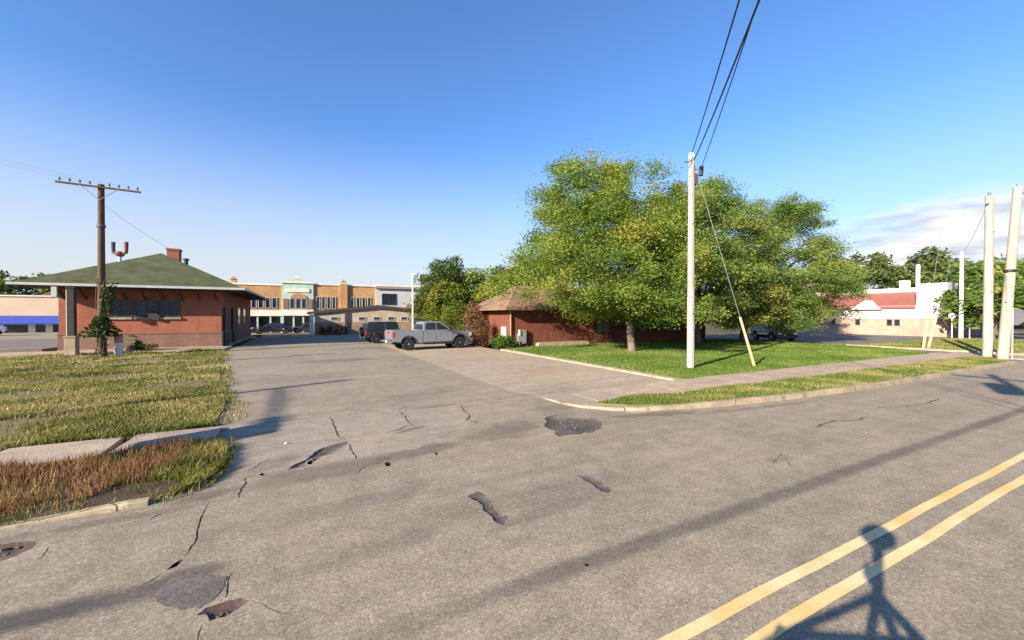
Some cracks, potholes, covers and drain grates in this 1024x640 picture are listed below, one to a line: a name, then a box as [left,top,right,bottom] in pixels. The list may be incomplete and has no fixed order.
pothole [197,598,249,621]
crack [325,417,373,474]
crack [238,444,275,498]
pothole [0,541,36,561]
crack [140,503,209,587]
pothole [467,491,508,525]
pothole [576,475,611,493]
crack [386,411,415,433]
pothole [288,441,348,470]
crack [816,398,939,427]
